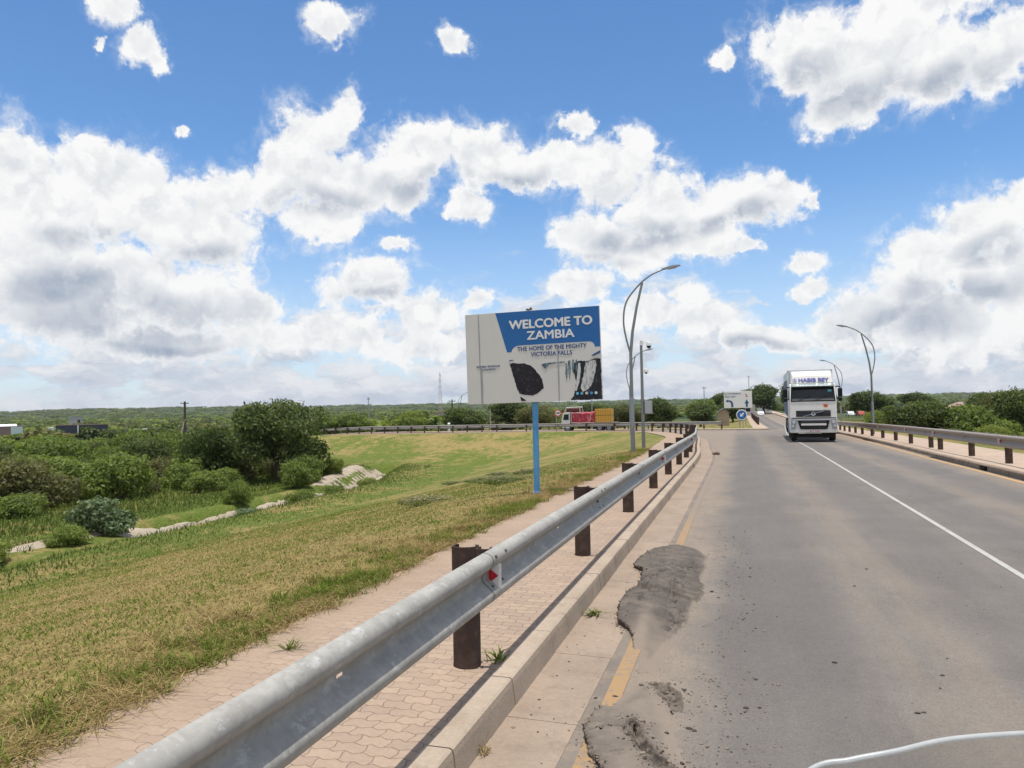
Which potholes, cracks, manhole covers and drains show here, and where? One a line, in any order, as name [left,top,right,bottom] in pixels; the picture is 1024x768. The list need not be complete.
pothole [648,683,684,712]
pothole [625,717,676,768]
